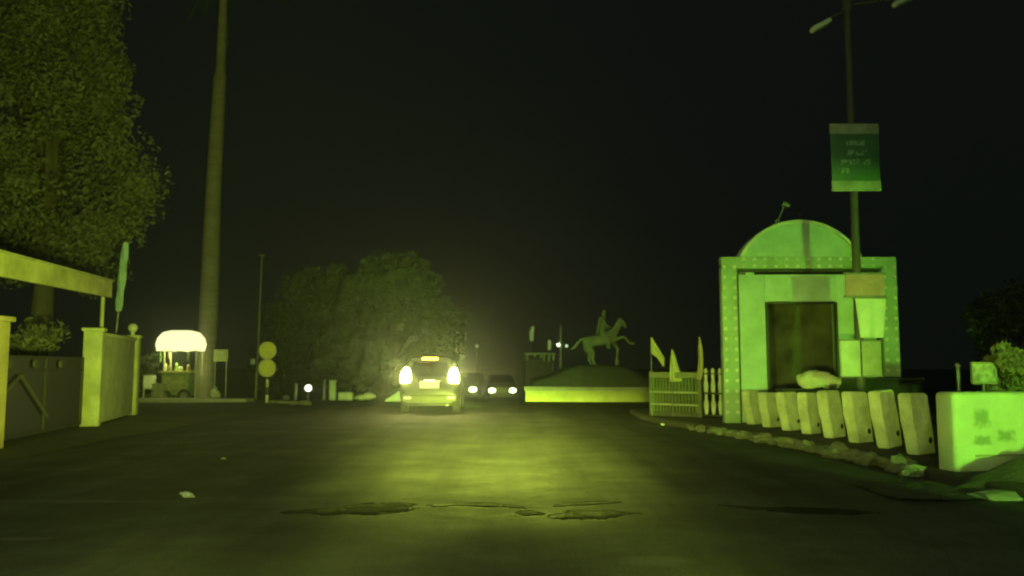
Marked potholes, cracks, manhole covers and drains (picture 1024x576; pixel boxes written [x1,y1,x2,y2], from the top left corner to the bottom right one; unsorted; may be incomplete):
pothole [545,510,642,521]
pothole [277,502,422,517]
pothole [511,510,558,518]
